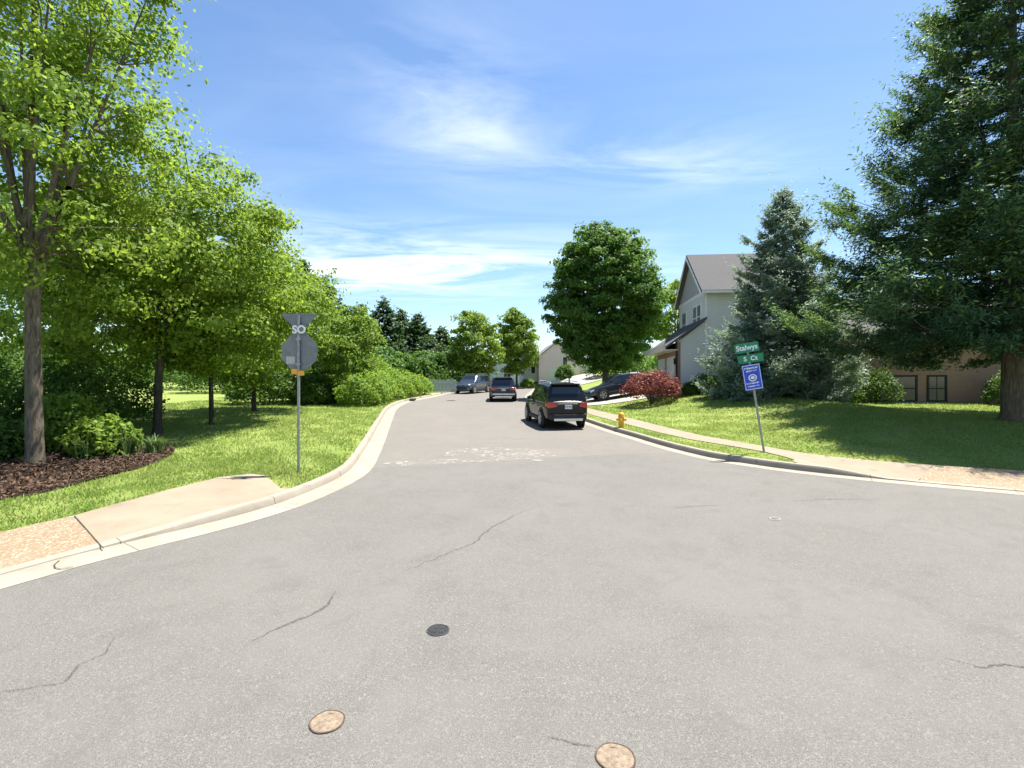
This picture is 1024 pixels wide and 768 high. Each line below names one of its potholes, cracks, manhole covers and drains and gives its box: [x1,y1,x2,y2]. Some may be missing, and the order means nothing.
manhole cover [595,742,636,768]
crack [252,595,333,641]
manhole cover [426,624,449,636]
manhole cover [309,710,345,734]
crack [0,638,114,692]
crack [407,509,531,570]
